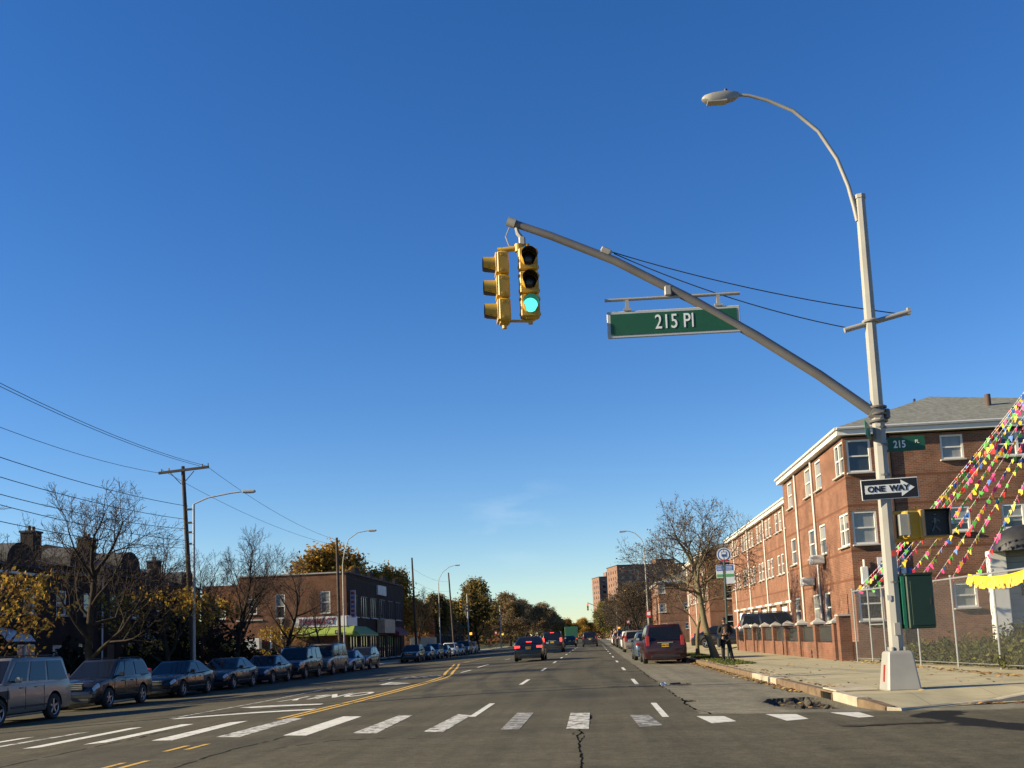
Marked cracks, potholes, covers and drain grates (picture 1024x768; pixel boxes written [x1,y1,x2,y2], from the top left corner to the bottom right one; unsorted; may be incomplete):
pothole [763,697,847,709]
crack [573,715,592,768]
